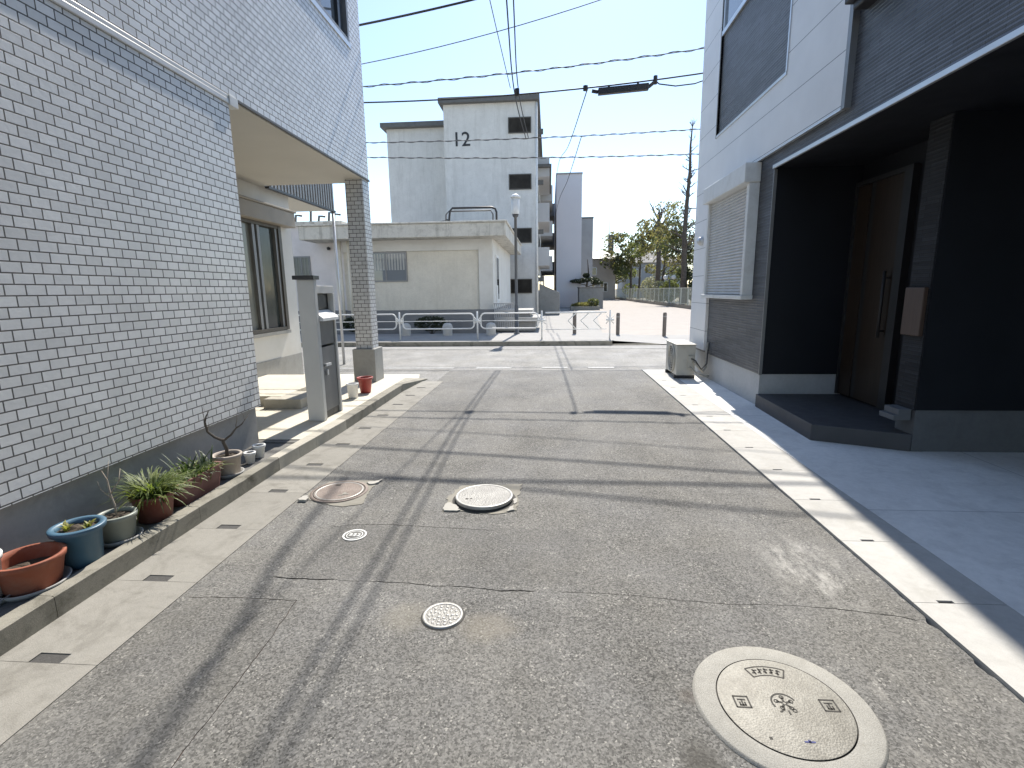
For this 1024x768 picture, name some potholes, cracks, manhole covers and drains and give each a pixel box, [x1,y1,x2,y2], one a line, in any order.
utility cover [421,602,465,631]
manhole cover [442,484,522,515]
manhole cover [298,479,383,507]
manhole cover [692,646,889,768]
crack [563,592,917,621]
utility cover [342,529,367,541]
crack [273,576,534,592]
